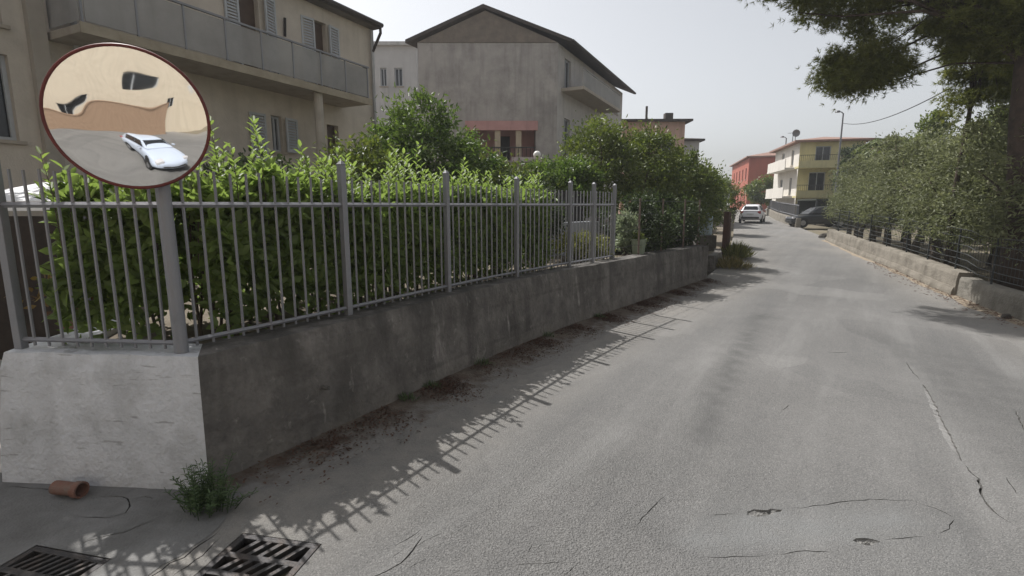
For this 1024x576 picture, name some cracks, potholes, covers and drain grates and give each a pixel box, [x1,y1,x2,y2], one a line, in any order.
drain grate [195,533,322,576]
drain grate [0,546,110,576]
pothole [853,538,880,546]
crack [152,531,219,576]
crack [375,531,441,576]
pothole [747,509,782,517]
crack [700,536,922,558]
crack [709,364,1017,533]
